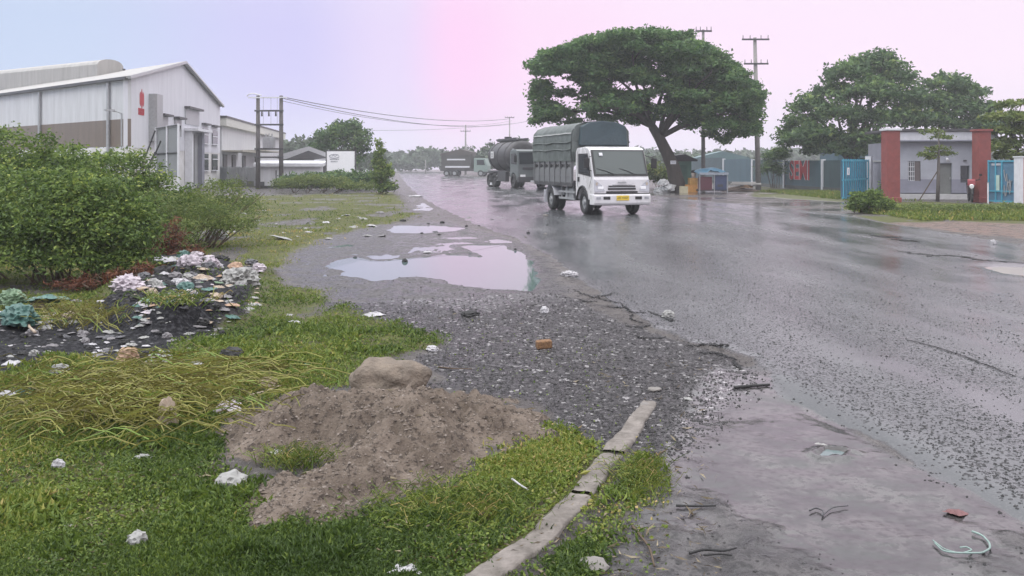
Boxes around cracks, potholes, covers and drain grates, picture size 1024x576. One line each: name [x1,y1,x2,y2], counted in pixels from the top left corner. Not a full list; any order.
crack [910,340,1014,376]
pothole [307,243,558,295]
crack [574,289,675,339]
